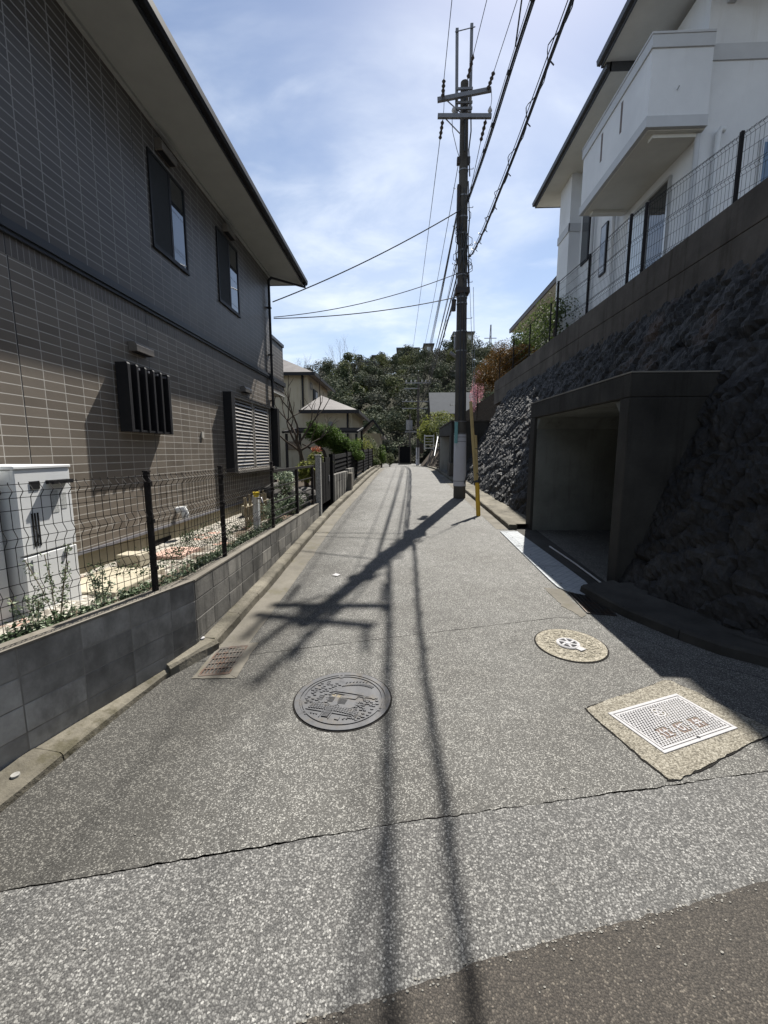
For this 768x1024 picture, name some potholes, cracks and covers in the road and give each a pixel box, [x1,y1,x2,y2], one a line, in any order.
manhole cover [534,629,609,664]
drain grate [191,642,259,679]
crack [0,771,768,892]
manhole cover [293,672,392,733]
utility cover [585,680,768,784]
